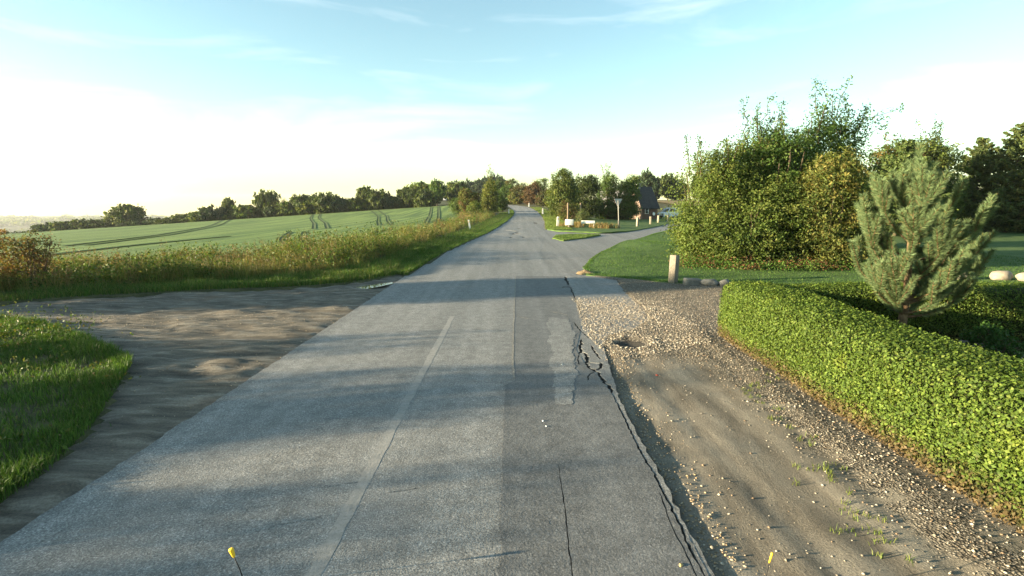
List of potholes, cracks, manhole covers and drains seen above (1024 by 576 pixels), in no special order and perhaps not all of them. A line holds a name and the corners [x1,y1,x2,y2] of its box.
crack [559,469,573,576]
crack [562,277,703,575]
pothole [616,340,645,348]
